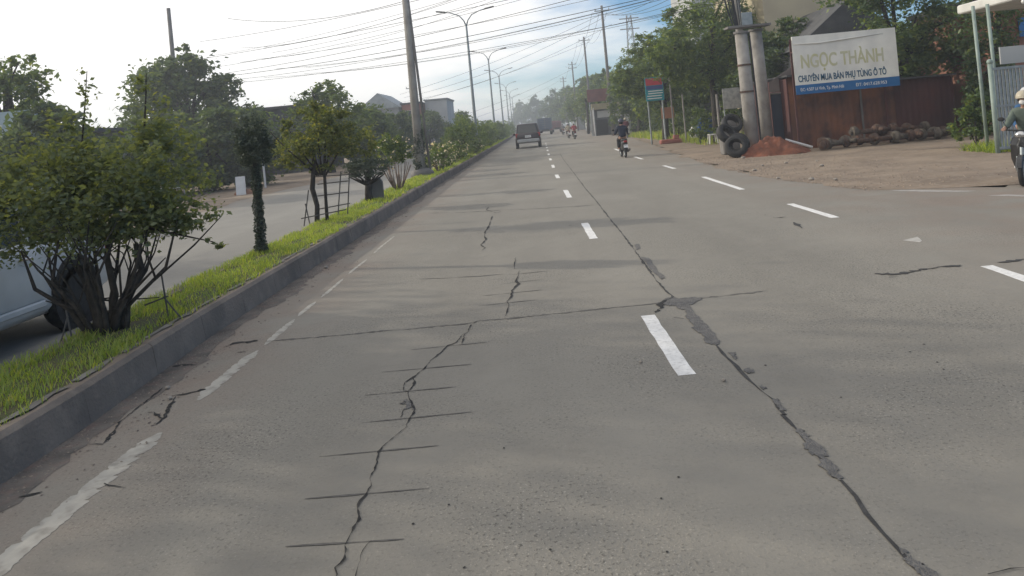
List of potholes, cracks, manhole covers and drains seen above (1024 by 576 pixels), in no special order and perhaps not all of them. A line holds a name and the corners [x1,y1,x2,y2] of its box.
crack [875,265,960,277]
crack [654,297,684,319]
crack [334,321,477,576]
crack [94,388,205,444]
crack [505,259,520,316]
